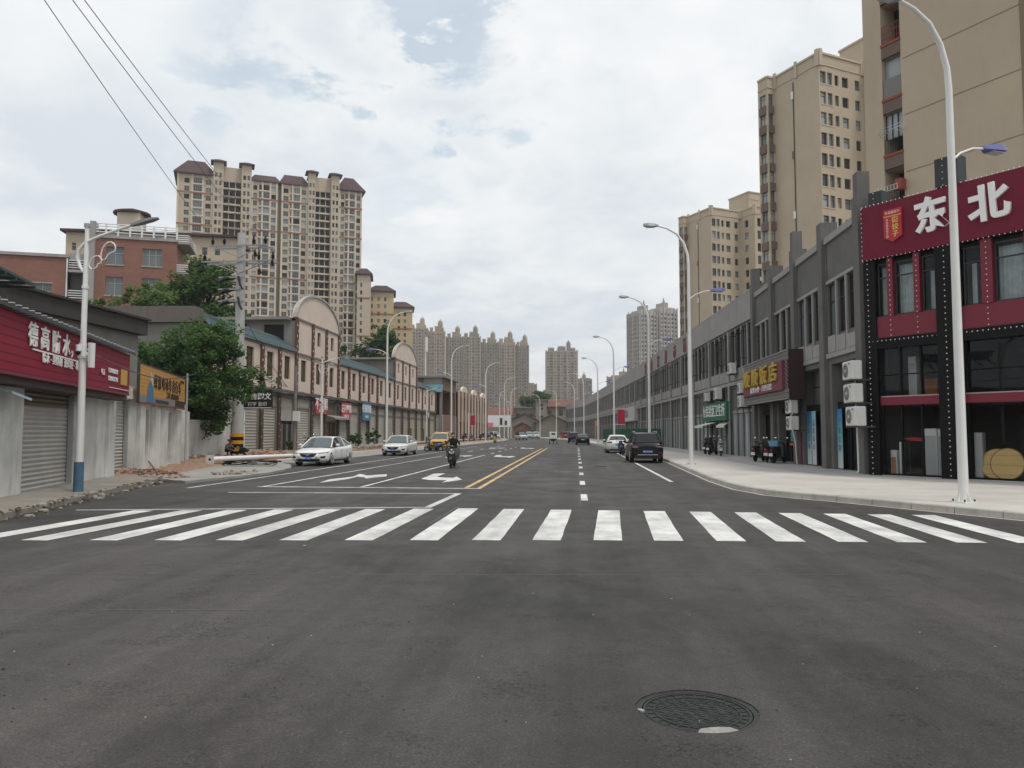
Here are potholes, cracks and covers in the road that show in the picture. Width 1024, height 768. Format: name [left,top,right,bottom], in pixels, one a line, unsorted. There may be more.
manhole cover [636,691,760,733]
